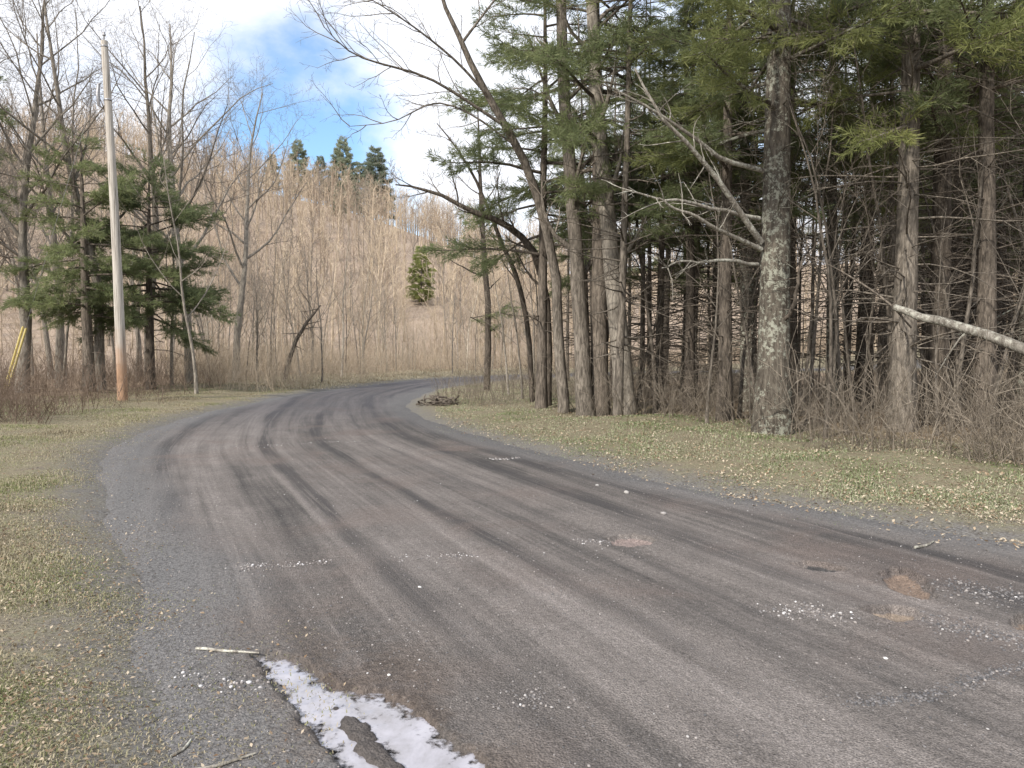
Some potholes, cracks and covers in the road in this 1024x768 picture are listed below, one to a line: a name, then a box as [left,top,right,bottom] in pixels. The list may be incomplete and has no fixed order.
pothole [989,607,1024,635]
pothole [845,601,942,627]
pothole [866,563,952,605]
pothole [594,531,668,550]
pothole [779,558,859,576]
